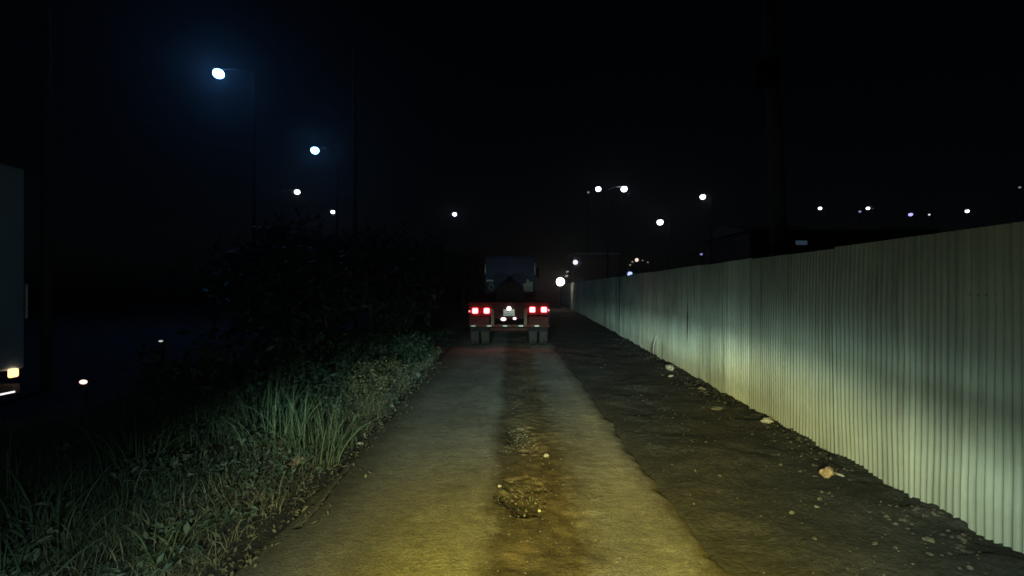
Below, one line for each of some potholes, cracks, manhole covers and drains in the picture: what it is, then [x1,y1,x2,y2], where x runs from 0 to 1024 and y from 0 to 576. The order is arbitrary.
pothole [504,423,543,459]
pothole [494,475,554,522]
